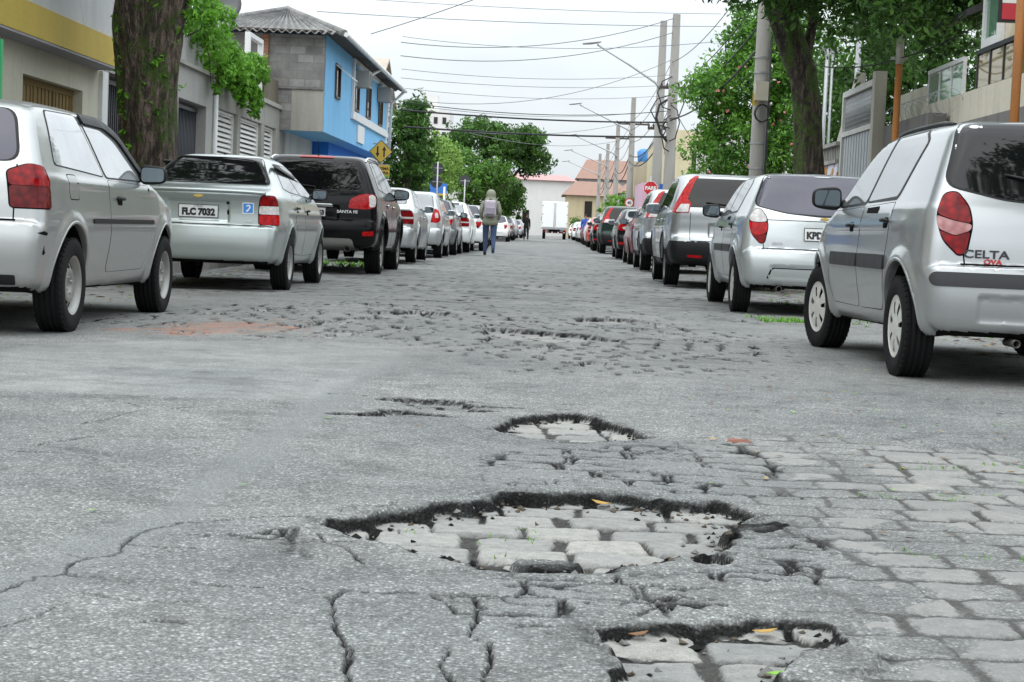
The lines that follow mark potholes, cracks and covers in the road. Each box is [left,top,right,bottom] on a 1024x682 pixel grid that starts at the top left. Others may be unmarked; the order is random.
pothole [314,489,762,577]
pothole [489,413,662,444]
crack [0,500,915,682]
pothole [711,521,793,540]
pothole [580,614,856,682]
